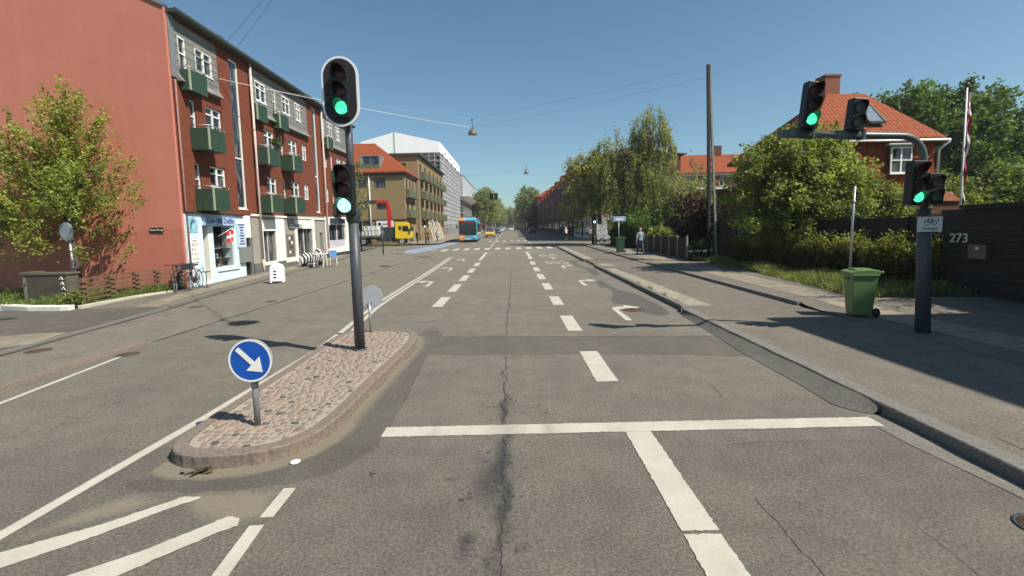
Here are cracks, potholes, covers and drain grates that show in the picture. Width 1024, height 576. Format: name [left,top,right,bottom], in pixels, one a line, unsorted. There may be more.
crack [751,493,825,576]
crack [497,357,508,576]
manhole cover [1011,513,1024,529]
